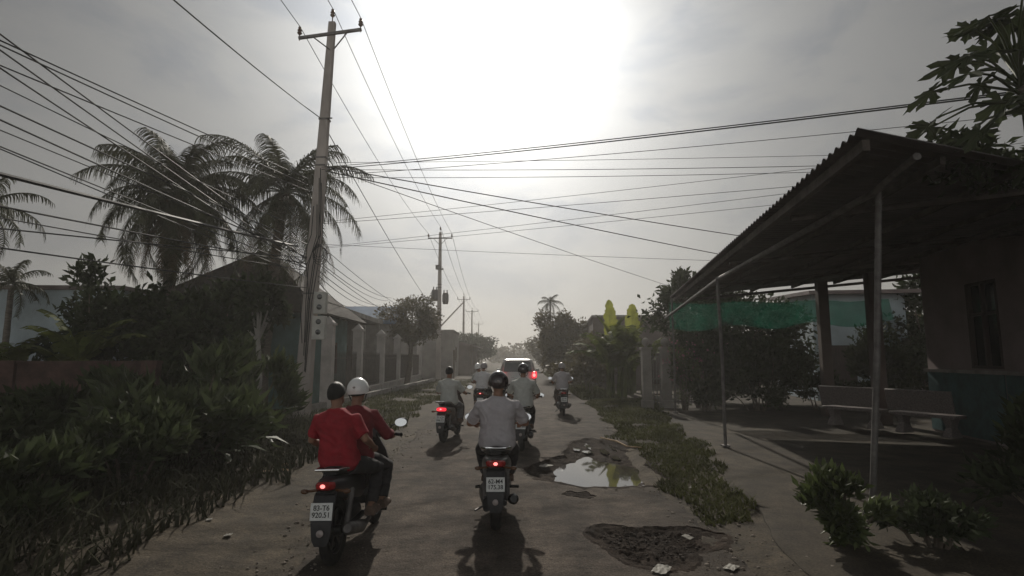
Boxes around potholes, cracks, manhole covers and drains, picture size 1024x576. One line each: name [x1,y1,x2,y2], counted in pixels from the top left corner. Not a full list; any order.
pothole [582,523,734,573]
pothole [562,491,597,499]
pothole [519,437,673,490]
